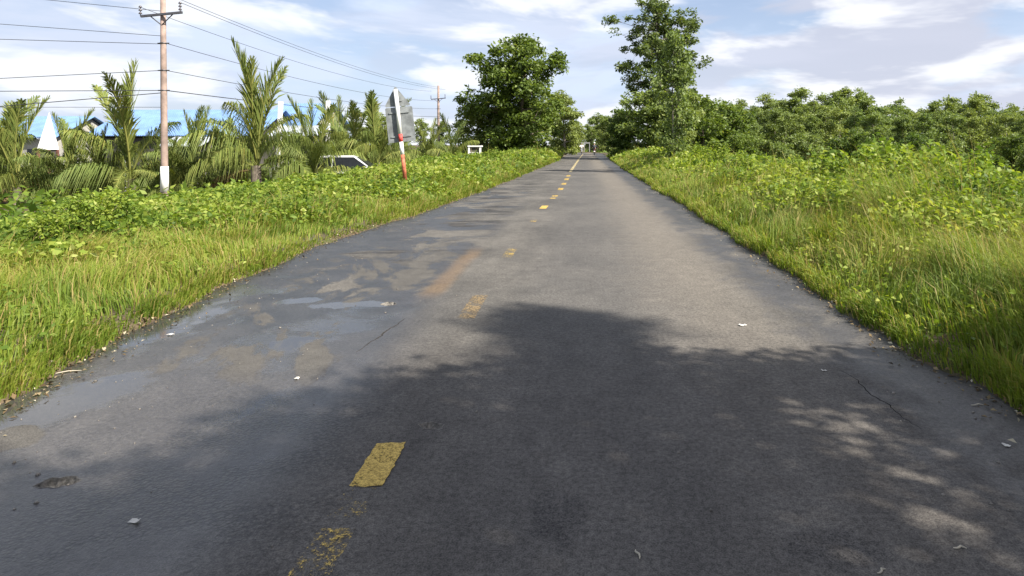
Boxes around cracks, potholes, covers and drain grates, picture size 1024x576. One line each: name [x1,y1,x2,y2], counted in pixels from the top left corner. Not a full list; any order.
pothole [33,476,81,488]
